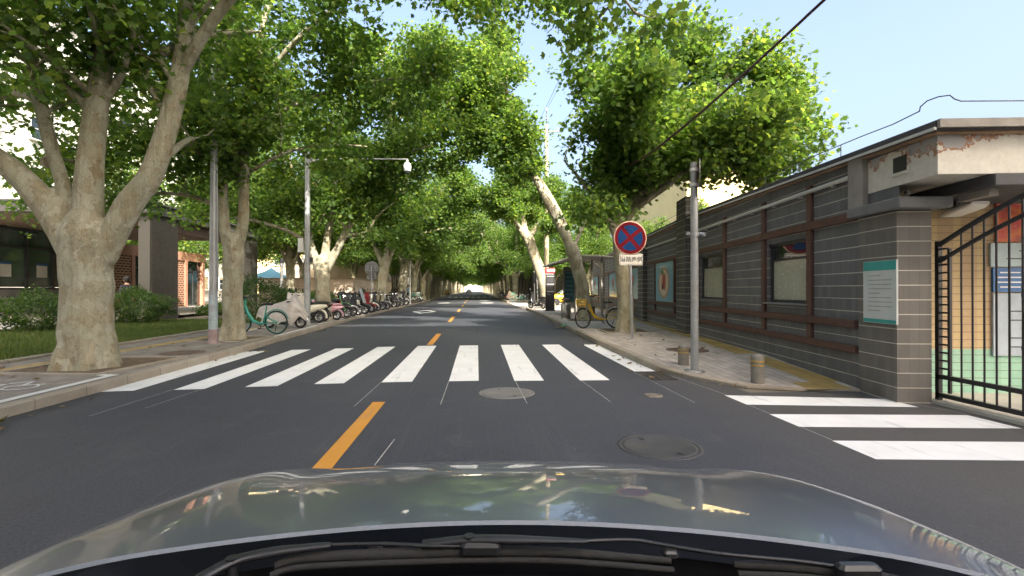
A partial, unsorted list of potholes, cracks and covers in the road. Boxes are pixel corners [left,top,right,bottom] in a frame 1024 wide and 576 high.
manhole cover [479,387,535,399]
drain grate [635,371,678,380]
manhole cover [617,434,704,461]
